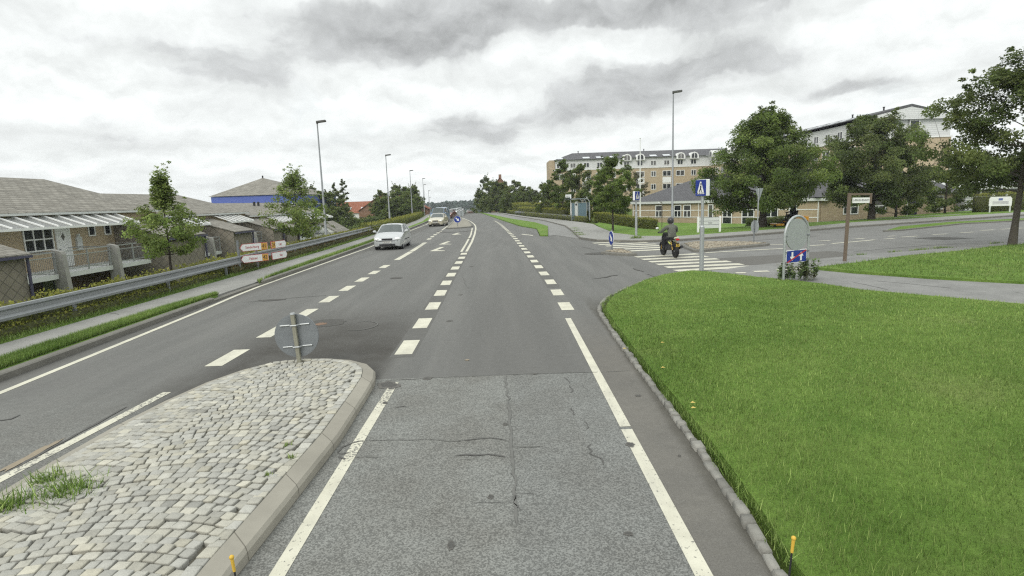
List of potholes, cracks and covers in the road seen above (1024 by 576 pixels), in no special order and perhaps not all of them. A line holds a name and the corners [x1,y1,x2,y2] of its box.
crack [393,437,543,460]
crack [564,377,604,464]
